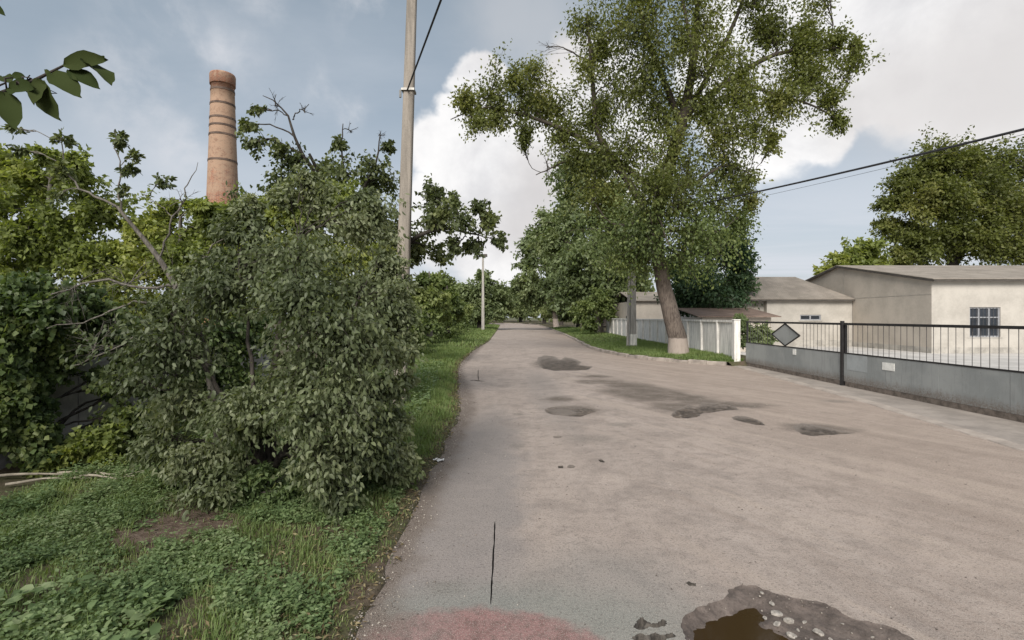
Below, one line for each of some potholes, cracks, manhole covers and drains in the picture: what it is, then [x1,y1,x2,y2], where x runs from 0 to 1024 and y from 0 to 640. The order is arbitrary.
pothole [633,616,667,630]
pothole [681,585,914,640]
pothole [631,632,676,640]
